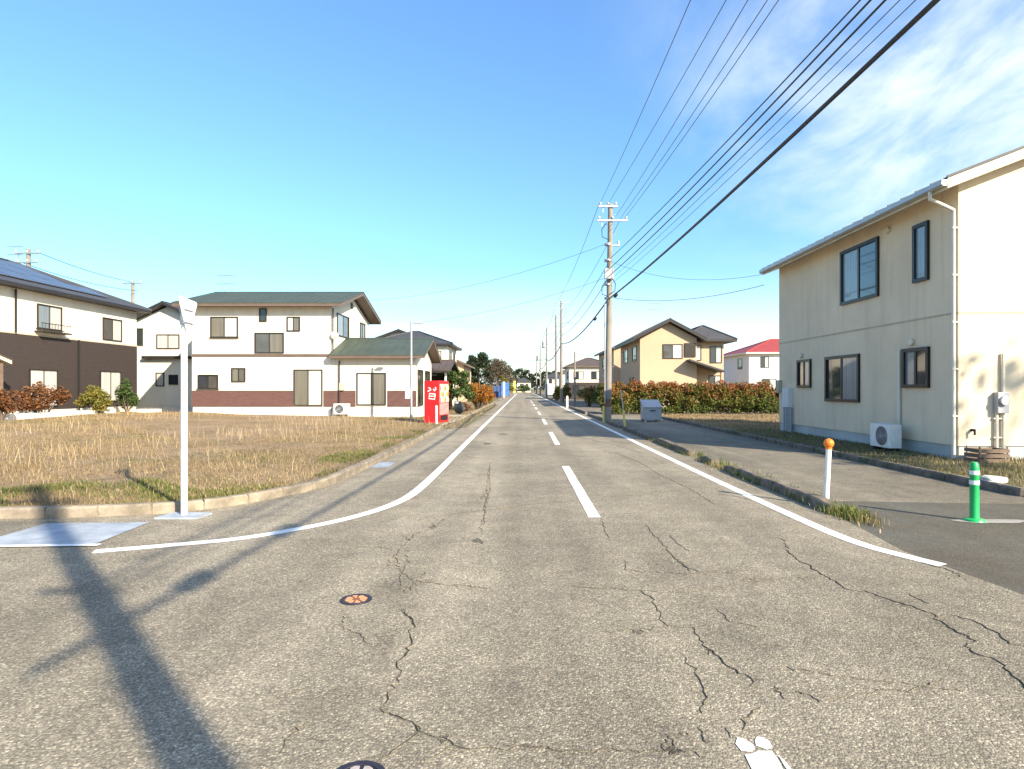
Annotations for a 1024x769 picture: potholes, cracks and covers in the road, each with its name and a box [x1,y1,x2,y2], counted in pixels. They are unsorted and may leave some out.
manhole cover [340,594,372,605]
crack [337,453,1024,763]
manhole cover [337,760,385,769]
